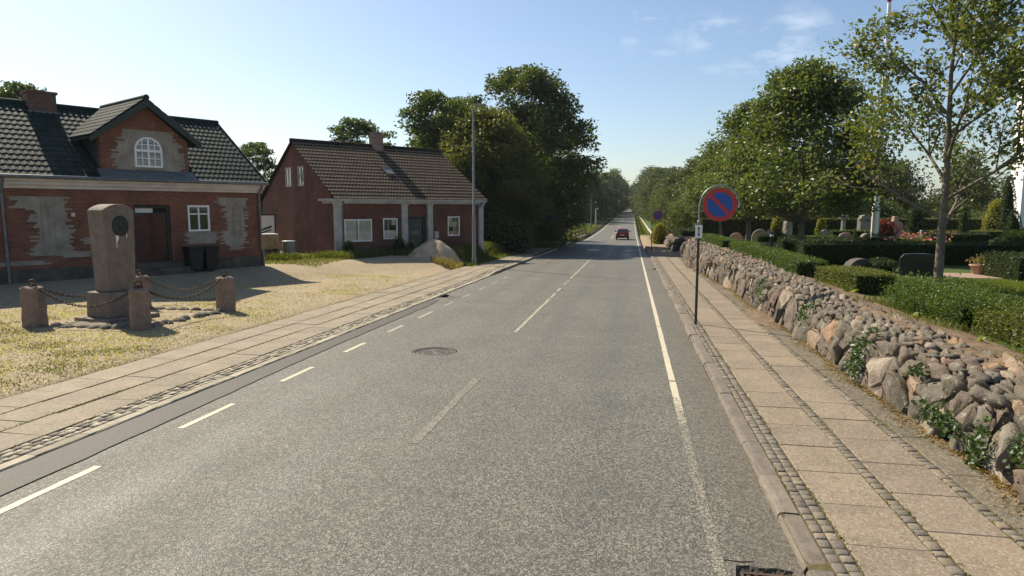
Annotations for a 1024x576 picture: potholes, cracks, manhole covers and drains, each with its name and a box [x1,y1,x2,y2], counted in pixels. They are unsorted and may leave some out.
manhole cover [413,348,456,356]
drain grate [736,565,796,576]
